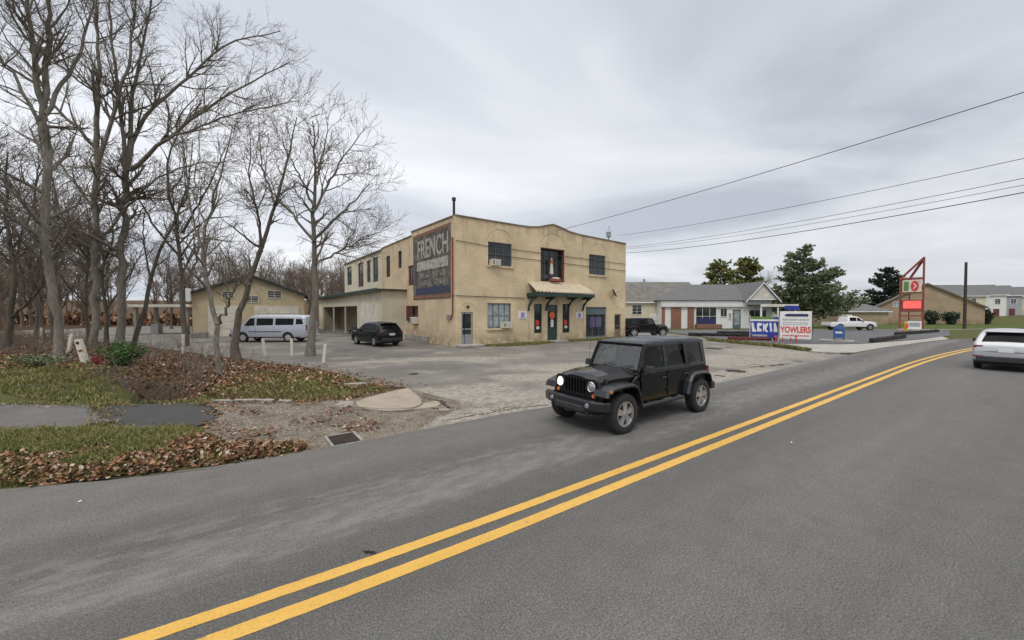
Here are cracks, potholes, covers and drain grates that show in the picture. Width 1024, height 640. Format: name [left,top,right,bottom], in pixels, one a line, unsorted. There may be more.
drain grate [324,431,364,448]
